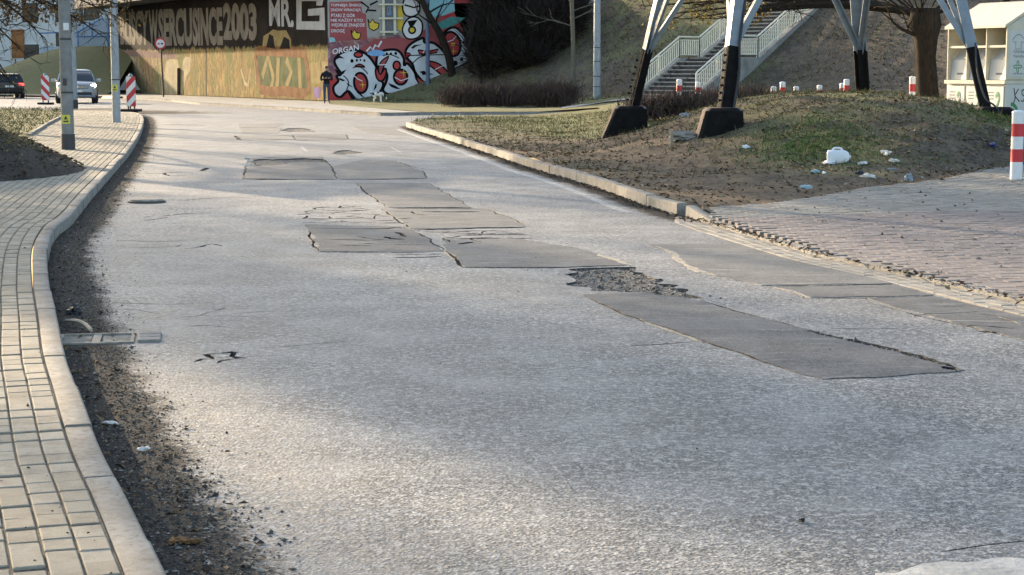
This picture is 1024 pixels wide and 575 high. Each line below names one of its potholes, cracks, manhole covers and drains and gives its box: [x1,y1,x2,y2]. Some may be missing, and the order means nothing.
crack [298,206,527,258]
drain grate [61,332,136,345]
crack [194,351,240,363]
pothole [566,267,702,299]
